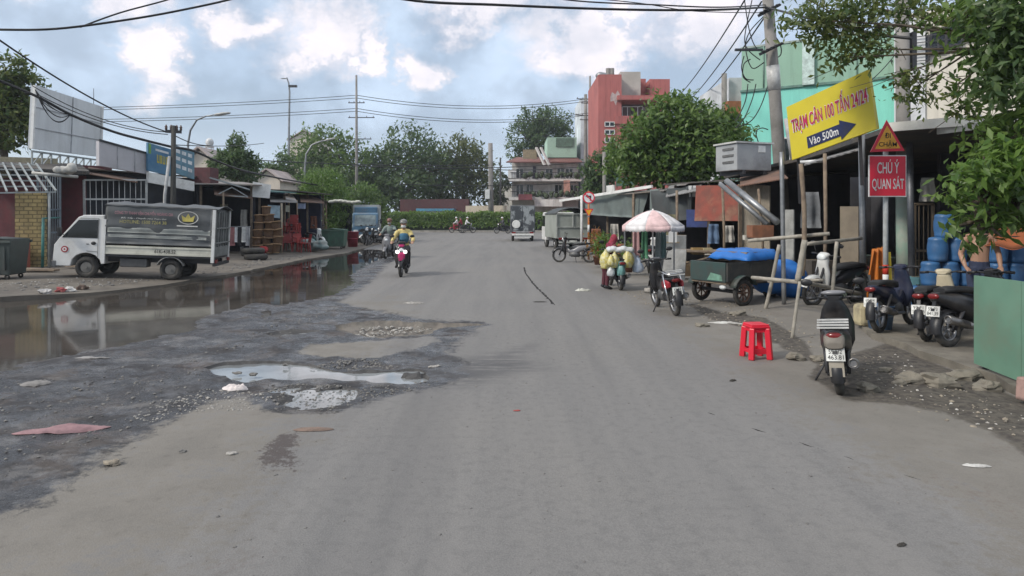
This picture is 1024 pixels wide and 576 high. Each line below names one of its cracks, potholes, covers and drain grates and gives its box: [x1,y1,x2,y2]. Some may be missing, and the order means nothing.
pothole [265,383,362,410]
pothole [204,361,430,380]
crack [524,267,555,305]
pothole [335,321,482,338]
